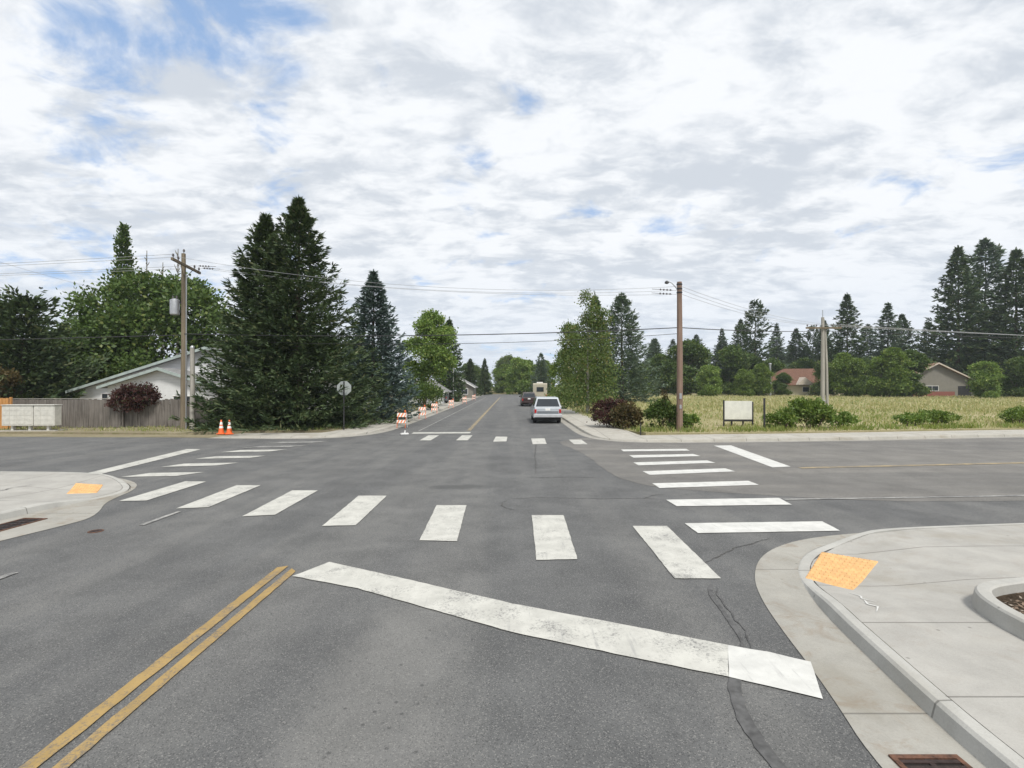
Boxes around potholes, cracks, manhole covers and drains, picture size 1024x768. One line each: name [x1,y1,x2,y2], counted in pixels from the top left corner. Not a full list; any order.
drain grate [888,754,973,768]
drain grate [0,518,48,532]
